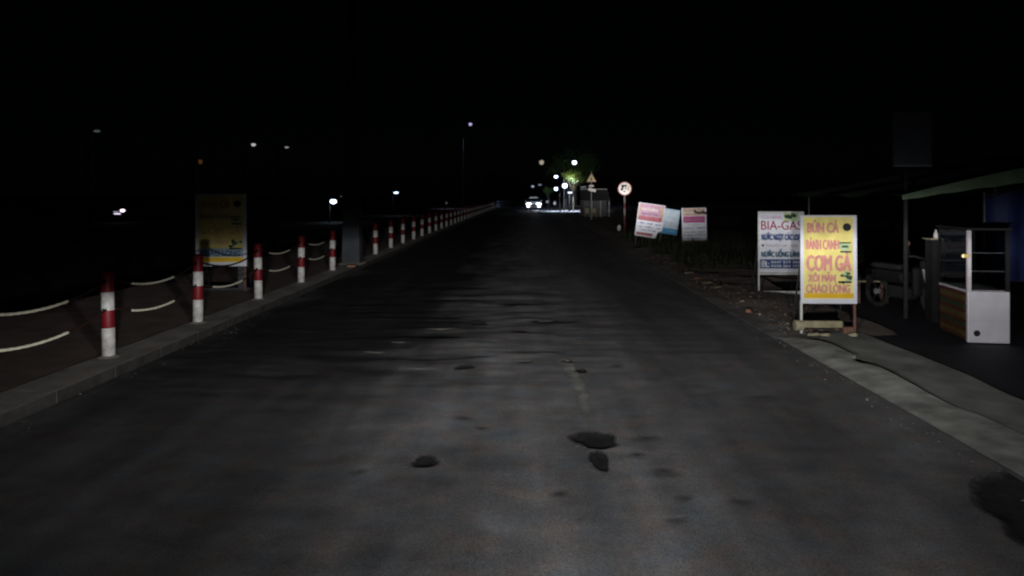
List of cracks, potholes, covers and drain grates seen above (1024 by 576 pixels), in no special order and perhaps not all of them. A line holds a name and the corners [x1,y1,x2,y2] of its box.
pothole [589,451,609,472]
pothole [411,456,439,468]
pothole [569,432,618,449]
